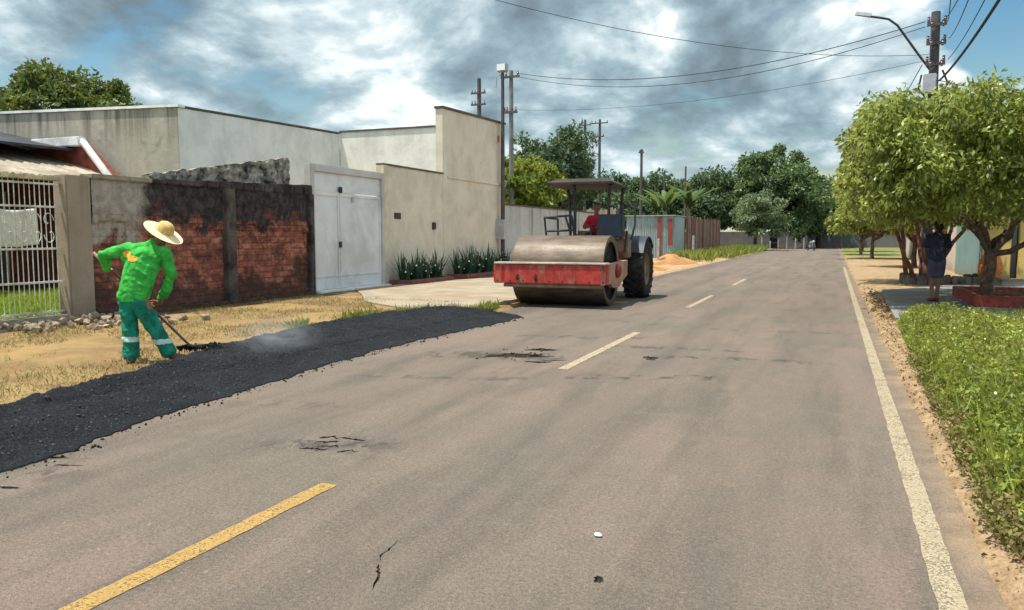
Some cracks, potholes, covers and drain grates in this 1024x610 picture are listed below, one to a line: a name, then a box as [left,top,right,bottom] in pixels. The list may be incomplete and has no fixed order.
pothole [476,347,555,363]
crack [373,543,396,588]
